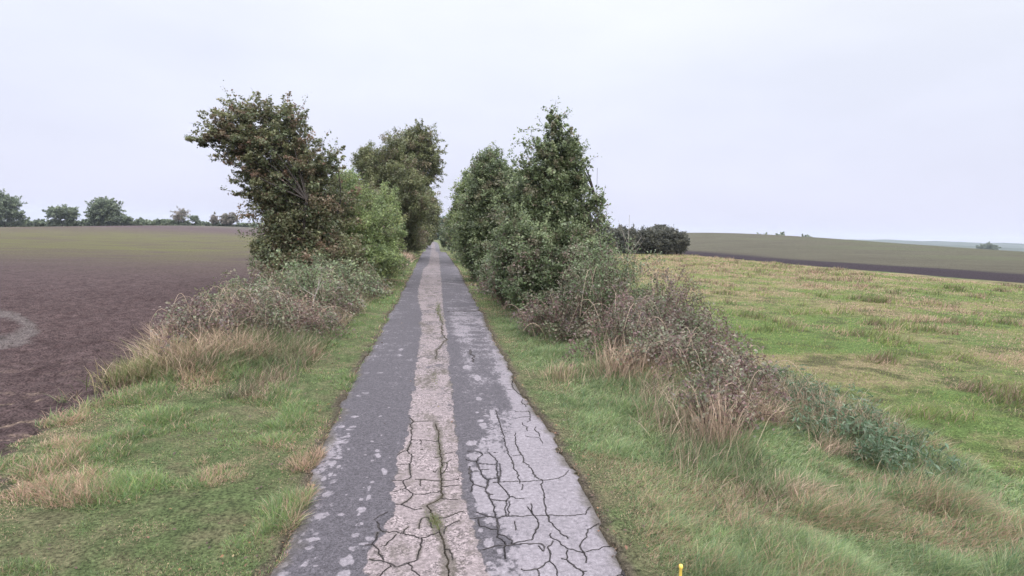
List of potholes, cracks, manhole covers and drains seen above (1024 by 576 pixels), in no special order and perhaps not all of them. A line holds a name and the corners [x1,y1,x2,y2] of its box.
crack [365,381,610,576]
